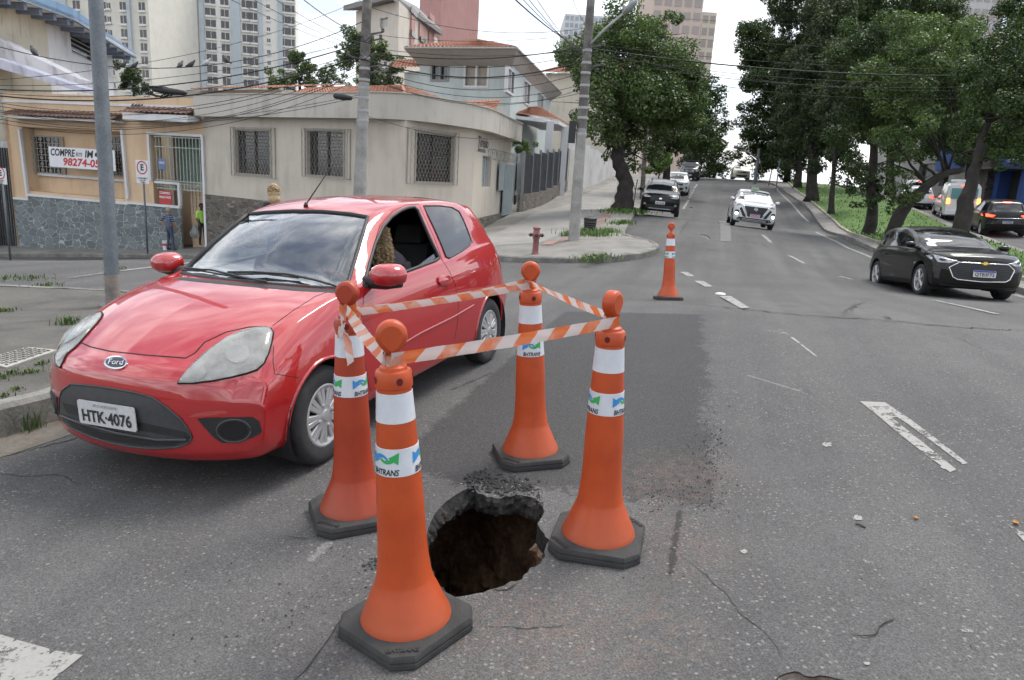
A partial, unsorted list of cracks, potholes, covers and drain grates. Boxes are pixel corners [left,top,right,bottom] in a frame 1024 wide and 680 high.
crack [691,300,1015,349]
pothole [427,486,549,597]
crack [294,621,340,680]
crack [682,556,784,658]
